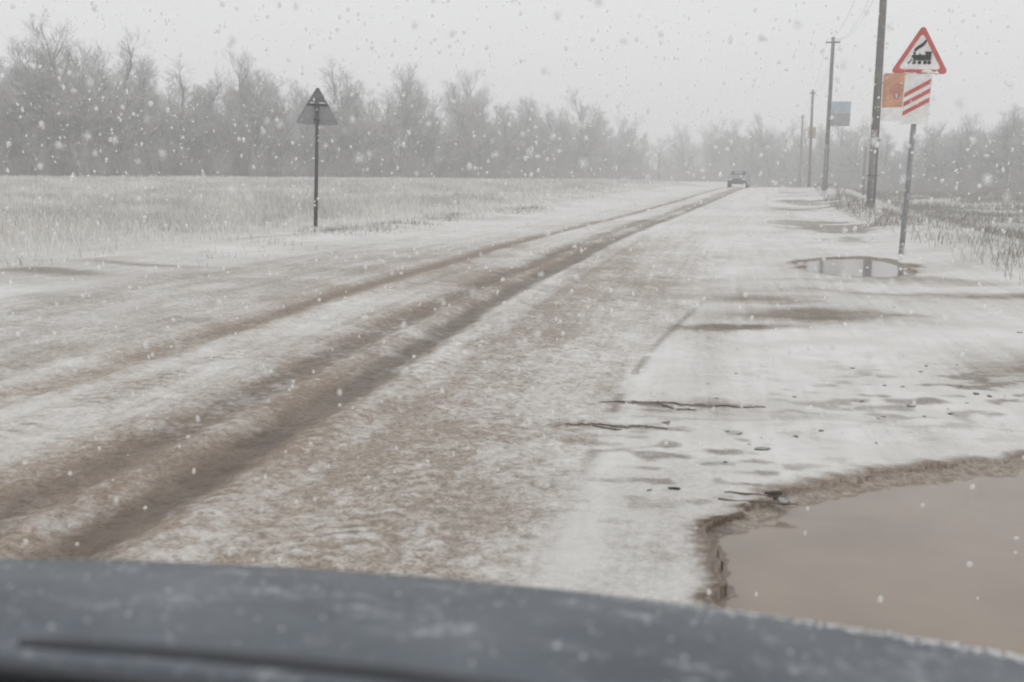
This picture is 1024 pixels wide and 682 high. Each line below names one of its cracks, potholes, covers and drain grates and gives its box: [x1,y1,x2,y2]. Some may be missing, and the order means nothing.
crack [565,400,766,430]
pothole [678,449,1024,655]
pothole [785,256,930,278]
